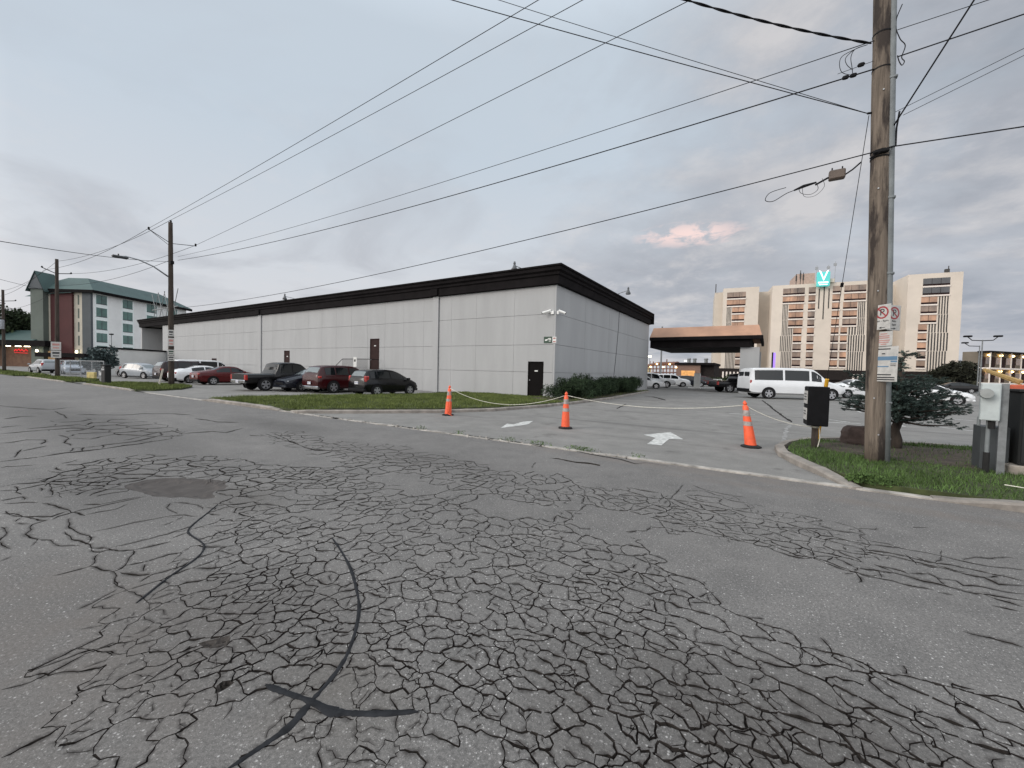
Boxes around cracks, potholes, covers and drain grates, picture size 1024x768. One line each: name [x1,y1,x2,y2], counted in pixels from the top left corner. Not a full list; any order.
crack [0,405,1024,768]
